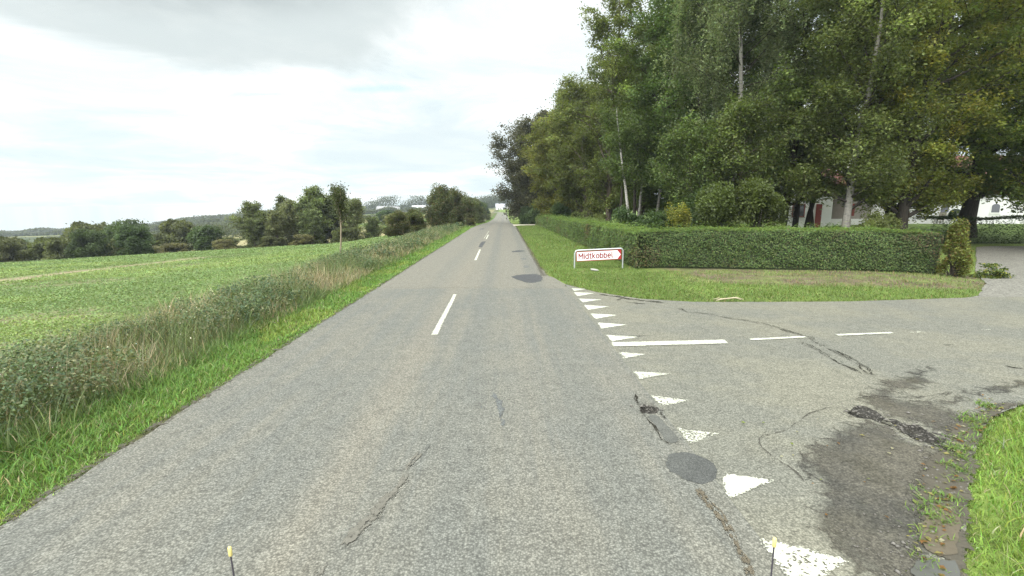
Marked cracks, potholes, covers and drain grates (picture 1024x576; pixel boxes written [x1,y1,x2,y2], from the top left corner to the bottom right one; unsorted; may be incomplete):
pothole [848,406,885,422]
crack [676,308,961,482]
pothole [640,404,660,414]
crack [406,451,422,469]
pothole [889,419,947,444]
